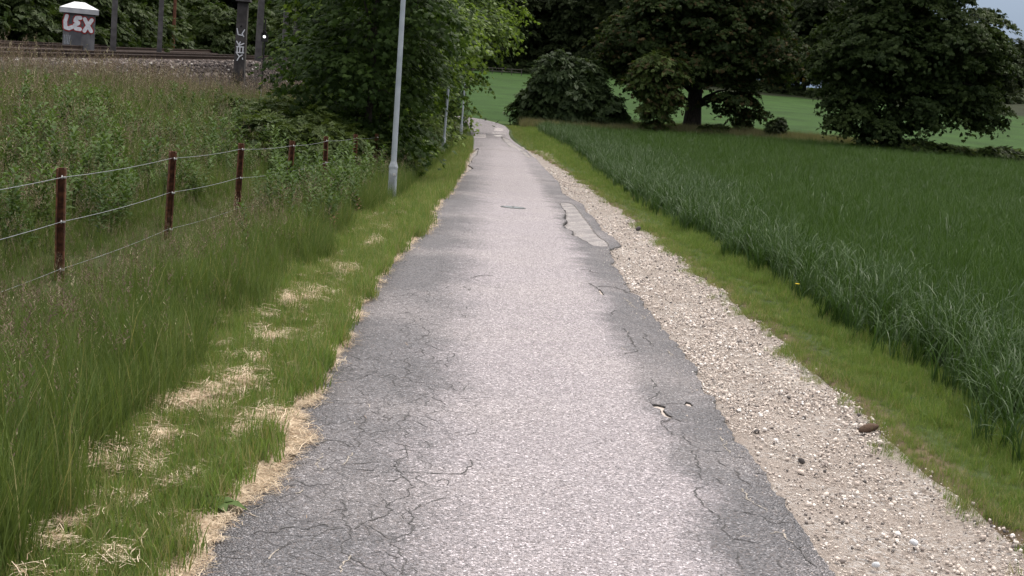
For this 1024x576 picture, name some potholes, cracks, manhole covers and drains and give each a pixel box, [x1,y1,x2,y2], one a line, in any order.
crack [581,269,823,571]
crack [217,254,496,576]
